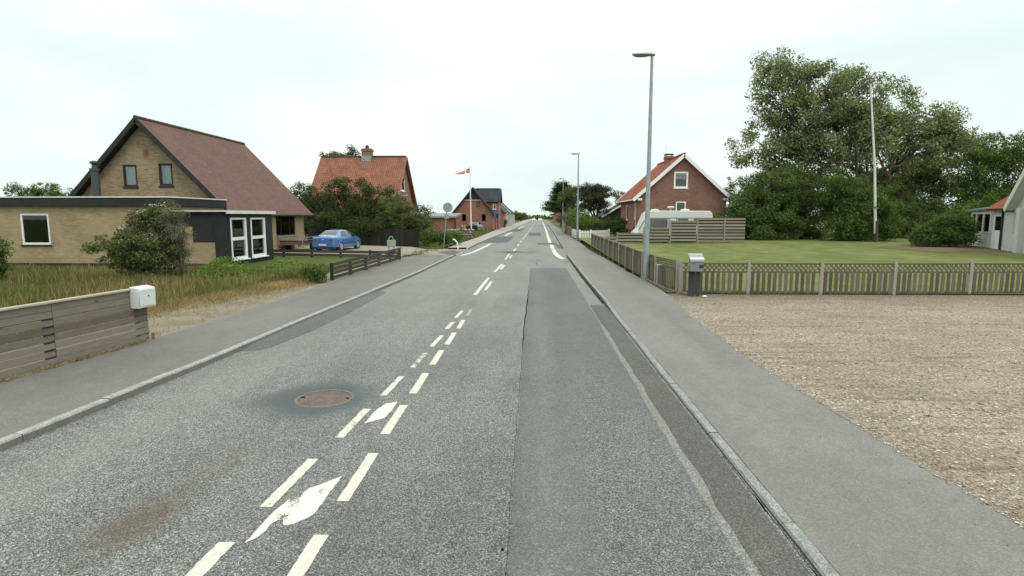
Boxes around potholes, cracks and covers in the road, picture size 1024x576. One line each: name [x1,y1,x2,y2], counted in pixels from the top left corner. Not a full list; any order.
manhole cover [294,389,354,408]
